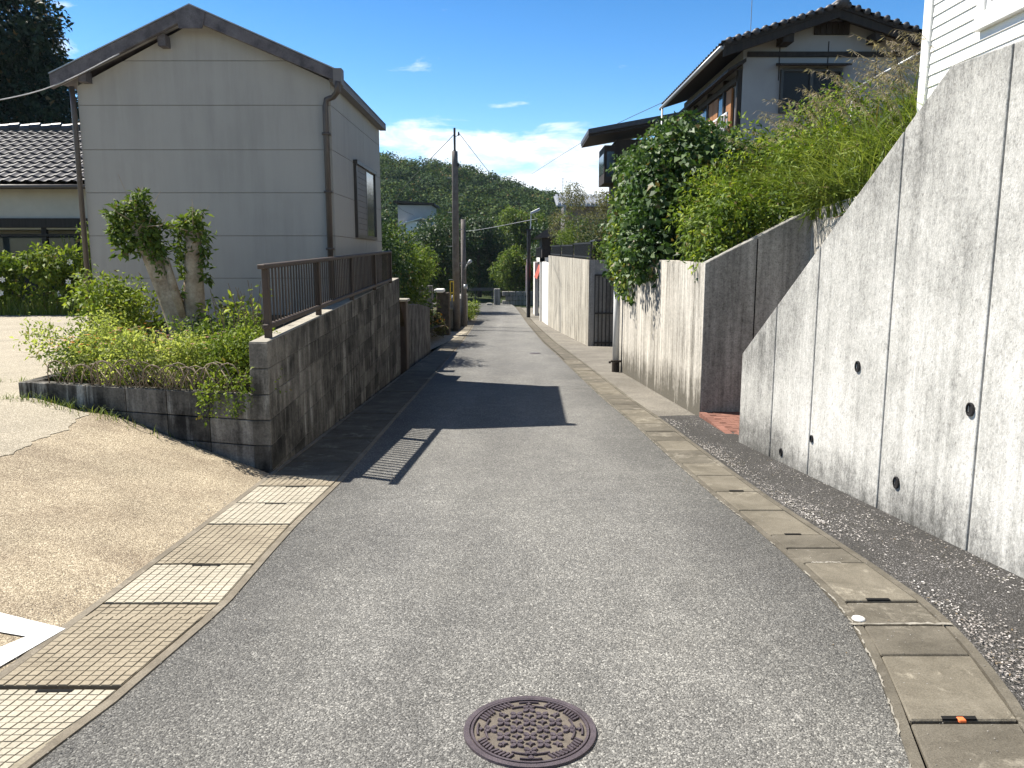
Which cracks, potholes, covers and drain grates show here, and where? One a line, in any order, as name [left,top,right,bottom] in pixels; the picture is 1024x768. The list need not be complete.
manhole cover [463,696,597,768]
